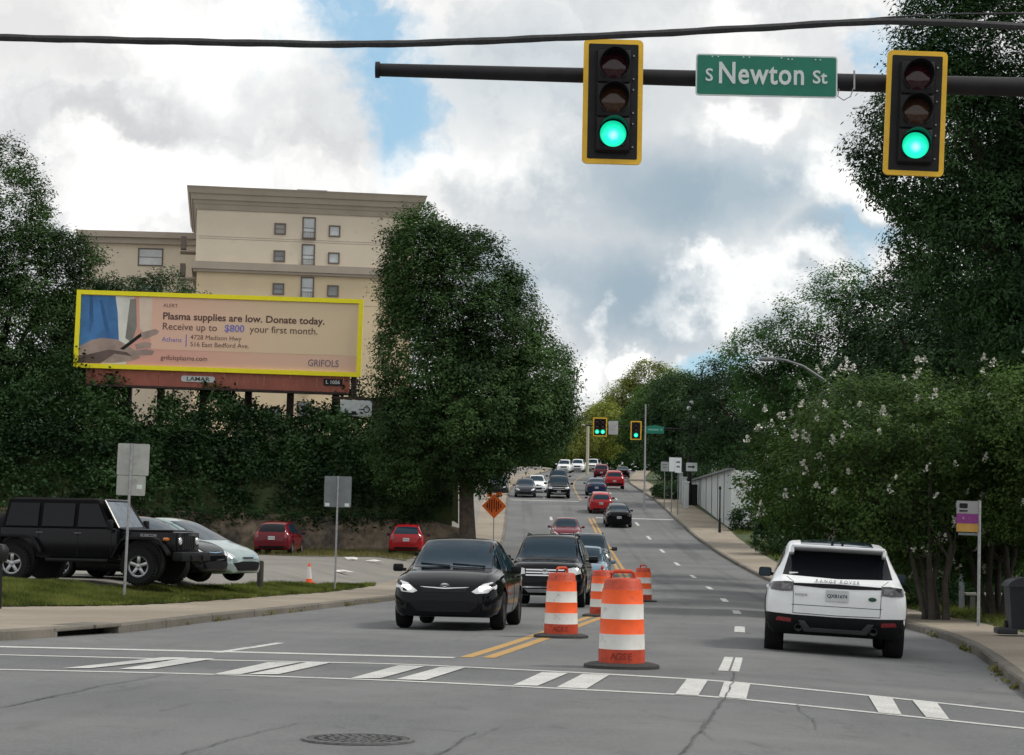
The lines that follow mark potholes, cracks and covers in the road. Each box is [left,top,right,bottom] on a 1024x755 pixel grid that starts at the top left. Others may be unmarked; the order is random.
crack [0,673,168,711]
drain grate [53,622,121,637]
manhole cover [301,733,415,745]
crack [679,672,735,755]
